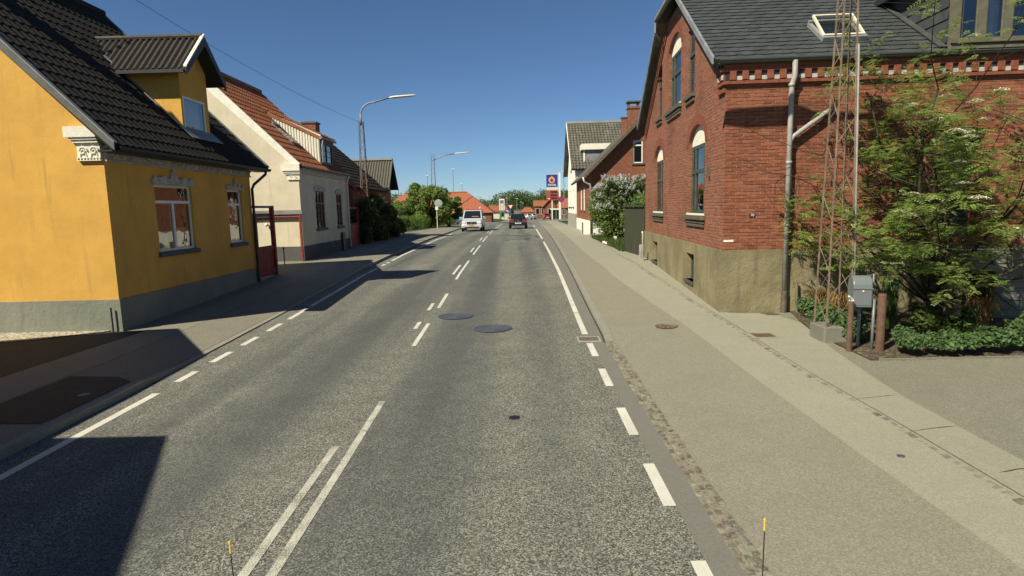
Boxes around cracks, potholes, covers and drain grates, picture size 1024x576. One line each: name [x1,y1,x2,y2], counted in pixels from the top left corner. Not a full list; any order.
manhole cover [473,324,512,332]
